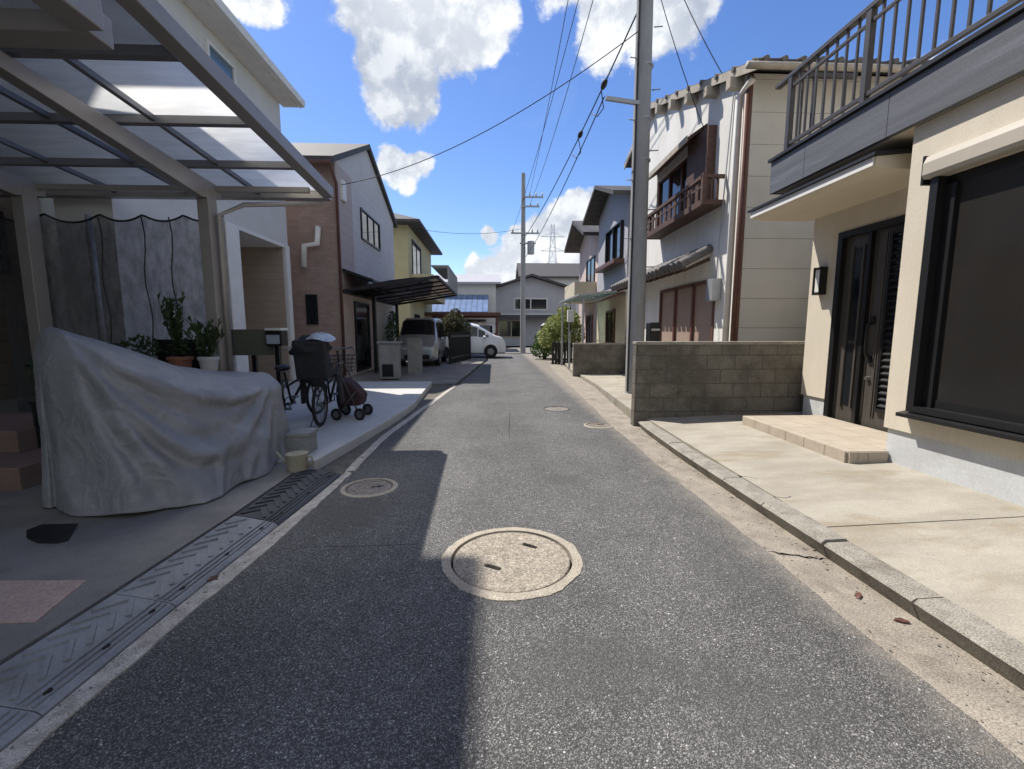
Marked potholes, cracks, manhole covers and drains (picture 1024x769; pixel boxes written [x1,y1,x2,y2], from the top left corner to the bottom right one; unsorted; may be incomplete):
manhole cover [441,527,583,602]
crack [768,551,825,560]
manhole cover [340,478,398,498]
